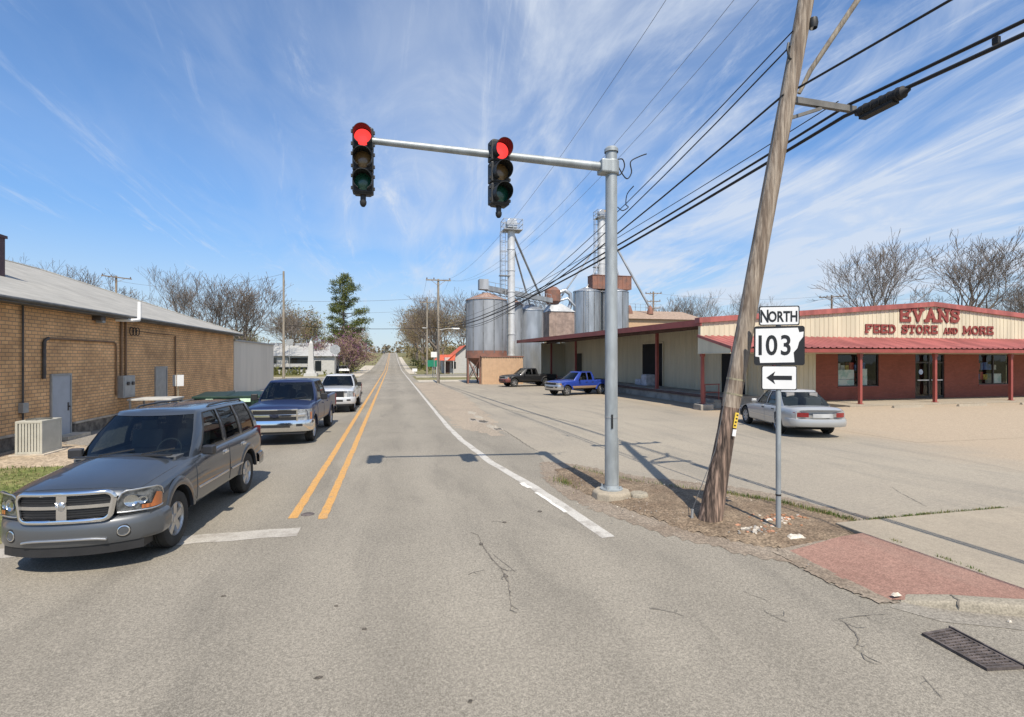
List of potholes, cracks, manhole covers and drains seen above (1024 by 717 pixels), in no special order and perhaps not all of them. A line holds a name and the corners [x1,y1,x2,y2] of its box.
drain grate [922,625,1024,671]
crack [839,614,885,665]
crack [468,533,517,612]
